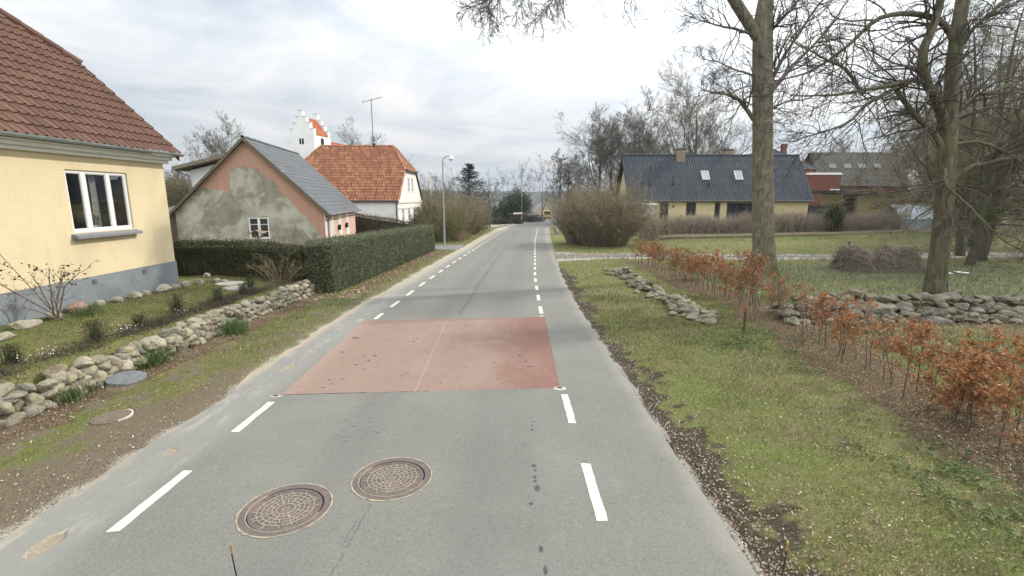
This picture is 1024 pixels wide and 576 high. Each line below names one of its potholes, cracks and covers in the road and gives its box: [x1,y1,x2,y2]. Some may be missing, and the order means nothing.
manhole cover [350,457,433,502]
manhole cover [235,483,333,539]
manhole cover [89,409,134,425]
crack [330,505,371,576]
